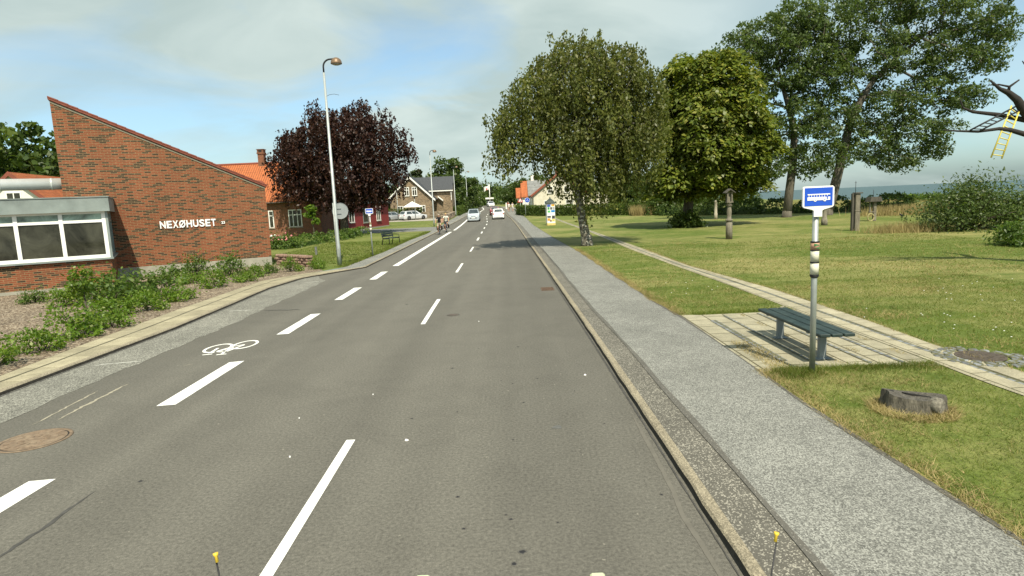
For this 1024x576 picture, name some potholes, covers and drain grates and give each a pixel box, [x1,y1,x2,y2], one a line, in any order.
manhole cover [0,428,74,453]
manhole cover [954,351,1008,362]
